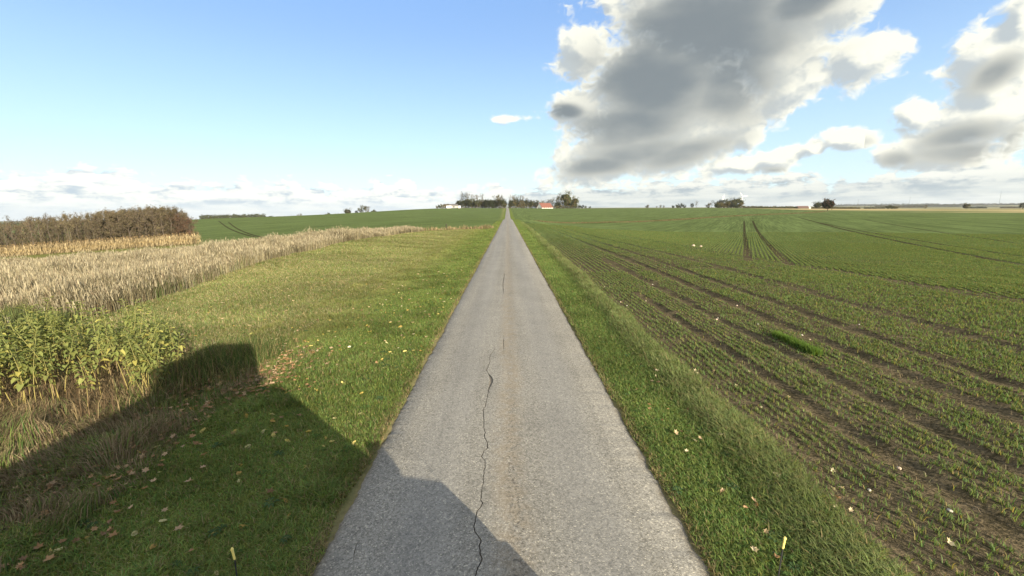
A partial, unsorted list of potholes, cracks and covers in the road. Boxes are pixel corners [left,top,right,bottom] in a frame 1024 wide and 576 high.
crack [473,339,504,576]
